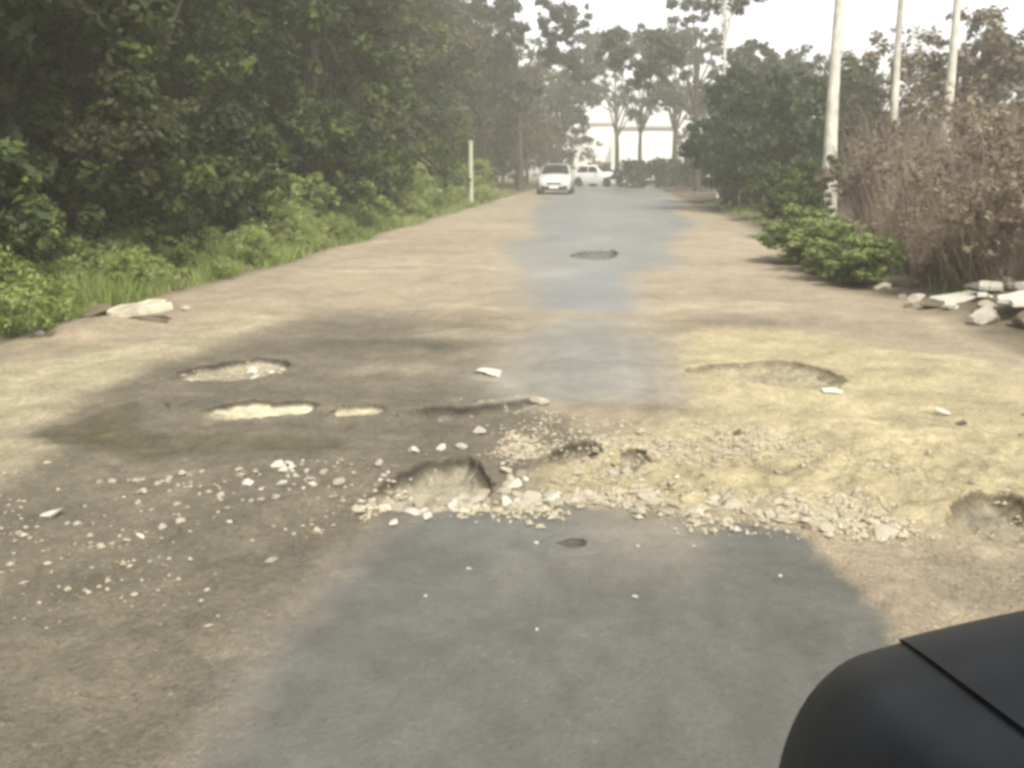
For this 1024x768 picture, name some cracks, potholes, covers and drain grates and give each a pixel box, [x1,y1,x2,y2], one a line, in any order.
pothole [0,395,386,479]
pothole [523,437,620,472]
pothole [663,357,870,394]
pothole [346,453,506,522]
pothole [151,354,308,387]
pothole [539,532,604,556]
pothole [552,249,634,262]
pothole [377,396,551,426]
pothole [591,447,665,477]
pothole [930,484,1024,553]
